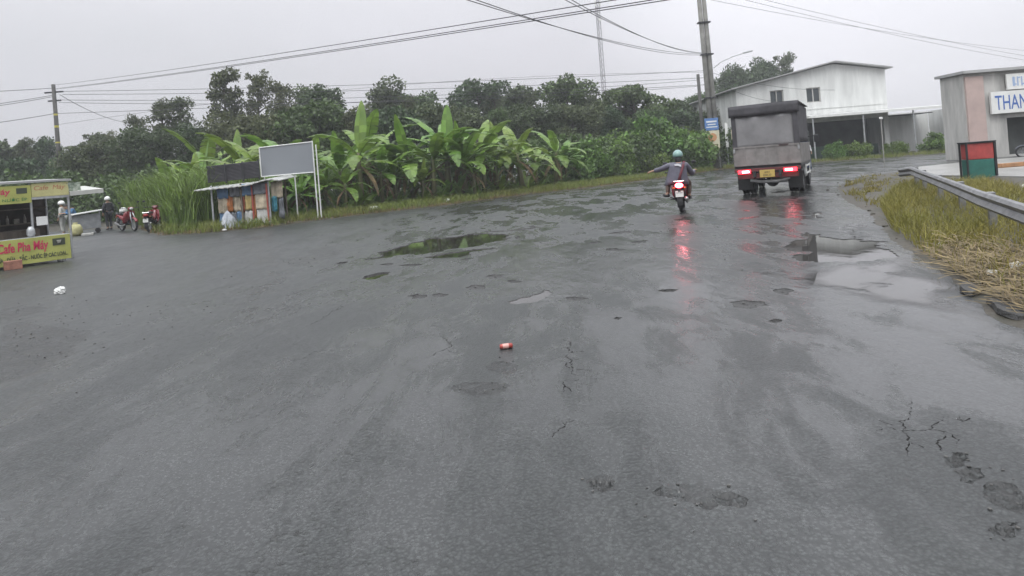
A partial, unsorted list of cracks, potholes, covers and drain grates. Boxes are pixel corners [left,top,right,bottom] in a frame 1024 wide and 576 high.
pothole [362,272,390,280]
pothole [508,290,552,304]
pothole [730,300,770,309]
crack [875,402,970,456]
pothole [988,521,1020,540]
pothole [581,475,617,493]
pothole [365,233,511,260]
pothole [953,465,1005,486]
pothole [982,478,1024,513]
pothole [782,232,900,263]
pothole [944,452,971,468]
